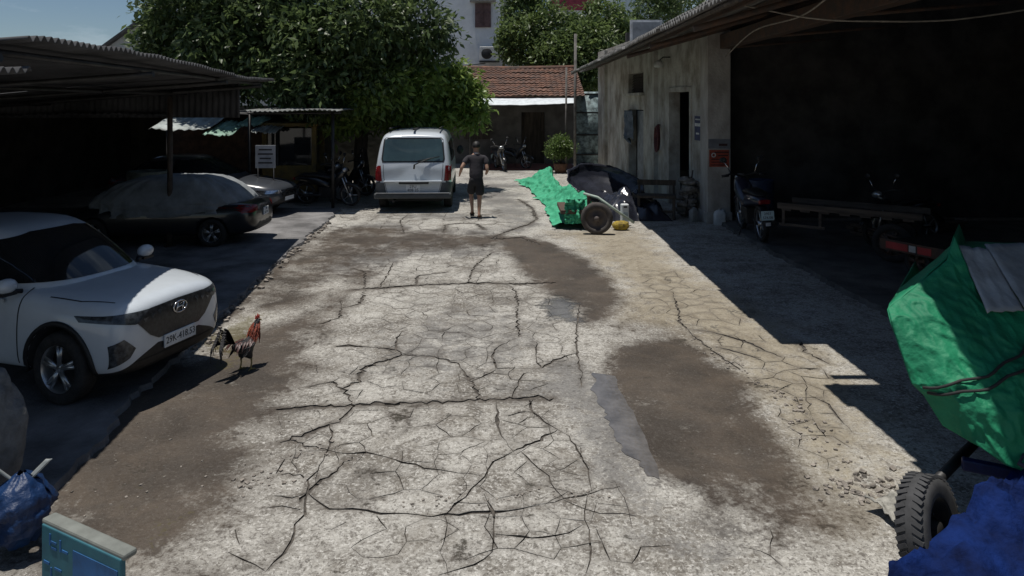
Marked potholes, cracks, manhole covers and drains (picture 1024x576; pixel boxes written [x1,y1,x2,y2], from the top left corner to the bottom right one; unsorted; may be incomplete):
crack [228,199,670,575]
